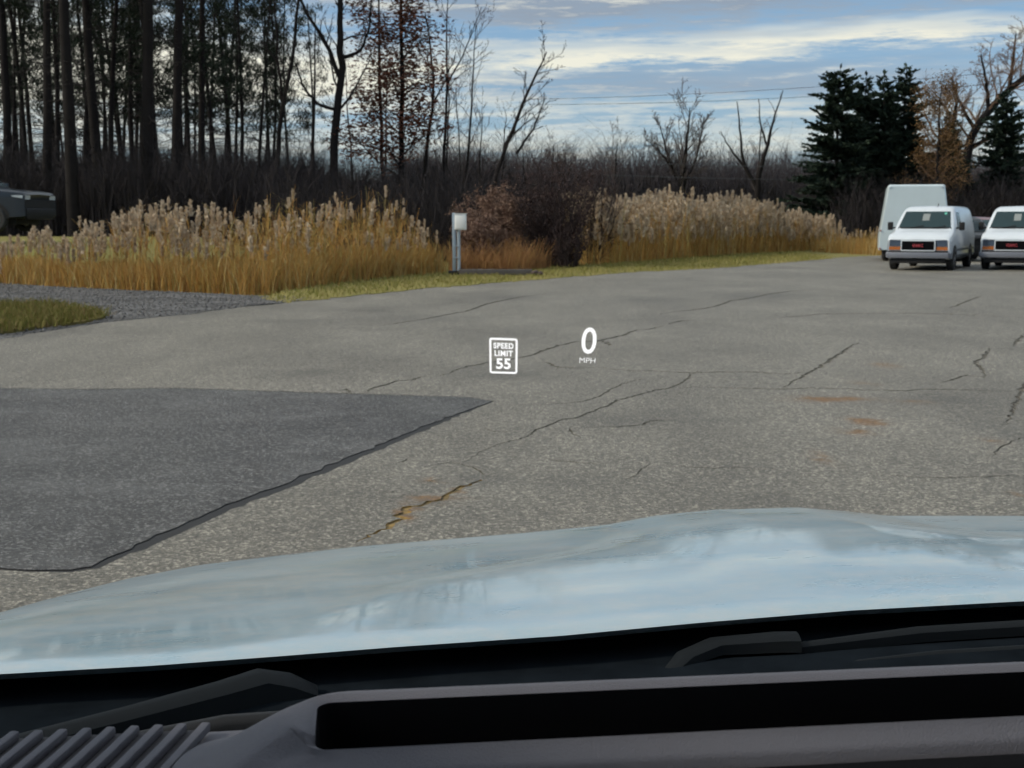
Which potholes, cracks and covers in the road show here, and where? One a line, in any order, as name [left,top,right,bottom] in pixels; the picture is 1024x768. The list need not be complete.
crack [338,376,423,393]
crack [993,383,1024,456]
crack [356,320,991,542]
